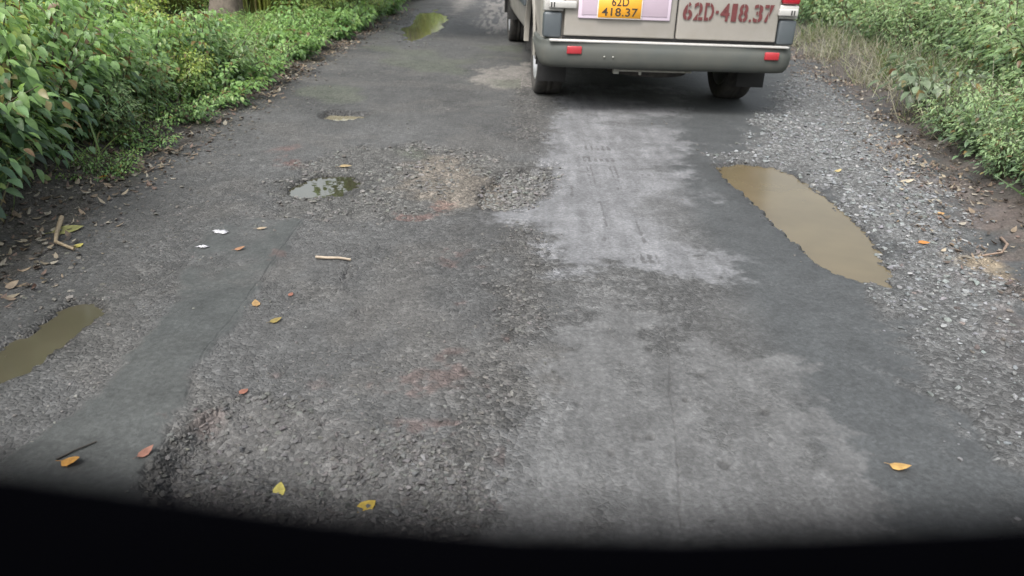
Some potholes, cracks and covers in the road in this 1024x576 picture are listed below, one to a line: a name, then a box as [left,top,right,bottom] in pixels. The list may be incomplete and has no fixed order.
pothole [276,172,373,201]
pothole [0,293,118,392]
pothole [706,158,906,289]
pothole [312,108,378,122]
crack [657,294,687,518]
pothole [386,5,456,47]
